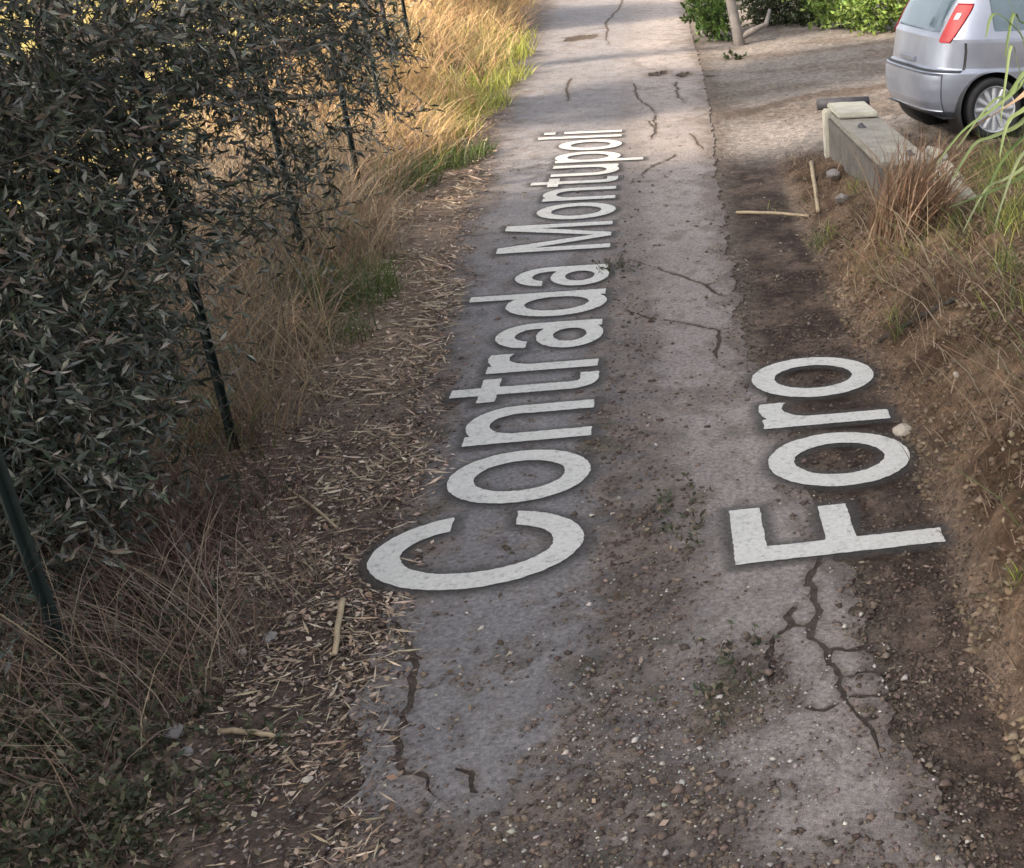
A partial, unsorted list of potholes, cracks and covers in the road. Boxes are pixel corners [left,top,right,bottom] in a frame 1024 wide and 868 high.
crack [605,0,623,44]
crack [374,621,478,793]
crack [764,557,895,761]
crack [629,259,740,297]
crack [627,310,743,359]
crack [633,73,715,175]
